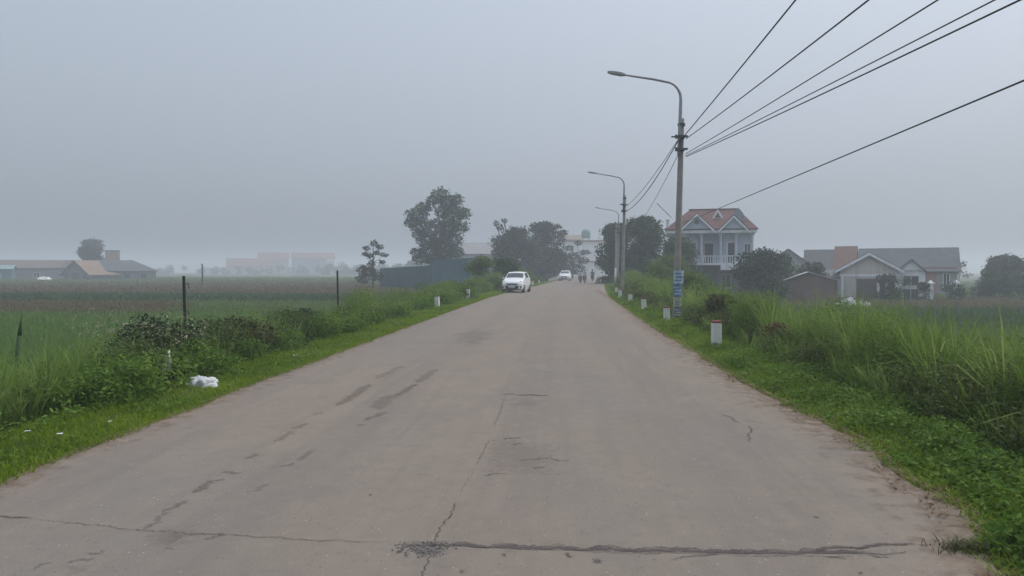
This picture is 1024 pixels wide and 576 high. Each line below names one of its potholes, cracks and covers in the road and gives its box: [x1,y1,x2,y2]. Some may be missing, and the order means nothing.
crack [421,503,455,576]
crack [66,522,373,542]
crack [815,543,926,559]
pothole [392,541,457,558]
